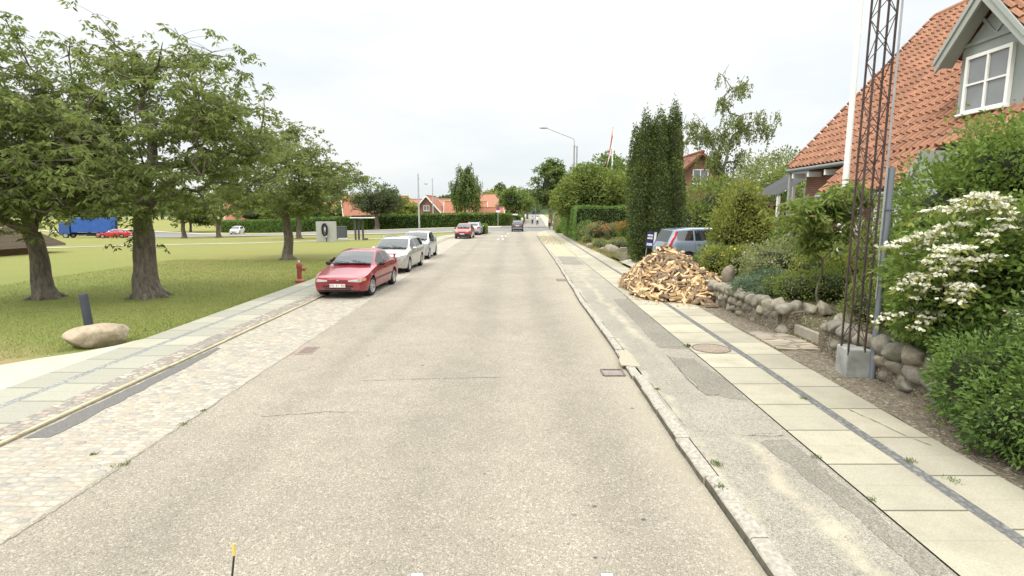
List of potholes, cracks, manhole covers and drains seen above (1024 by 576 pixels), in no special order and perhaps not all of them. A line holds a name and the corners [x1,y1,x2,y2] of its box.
drain grate [600,369,626,377]
manhole cover [692,344,731,353]
